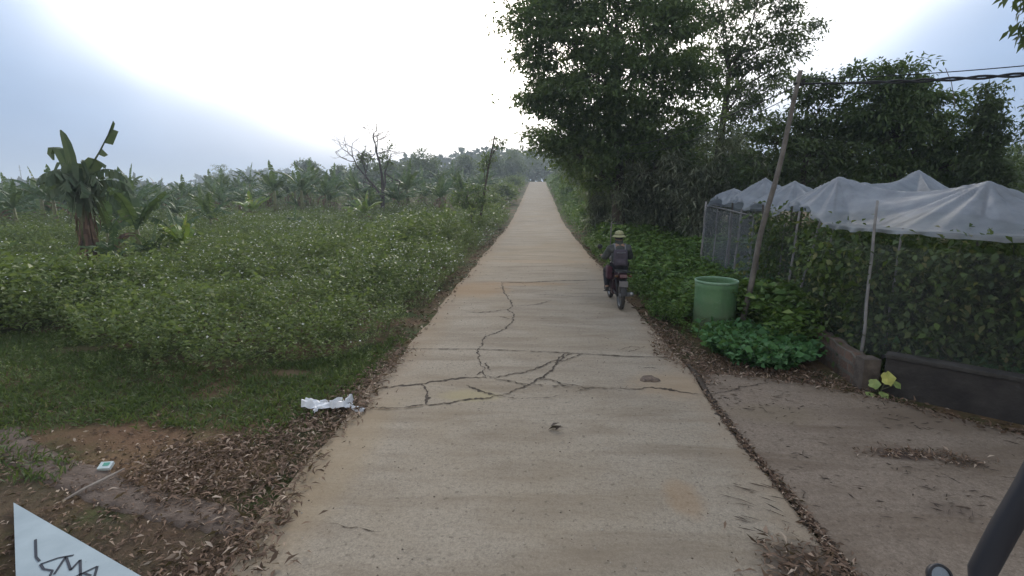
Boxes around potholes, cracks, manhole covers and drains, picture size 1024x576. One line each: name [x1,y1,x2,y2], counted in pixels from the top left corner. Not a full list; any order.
crack [376,285,768,409]
